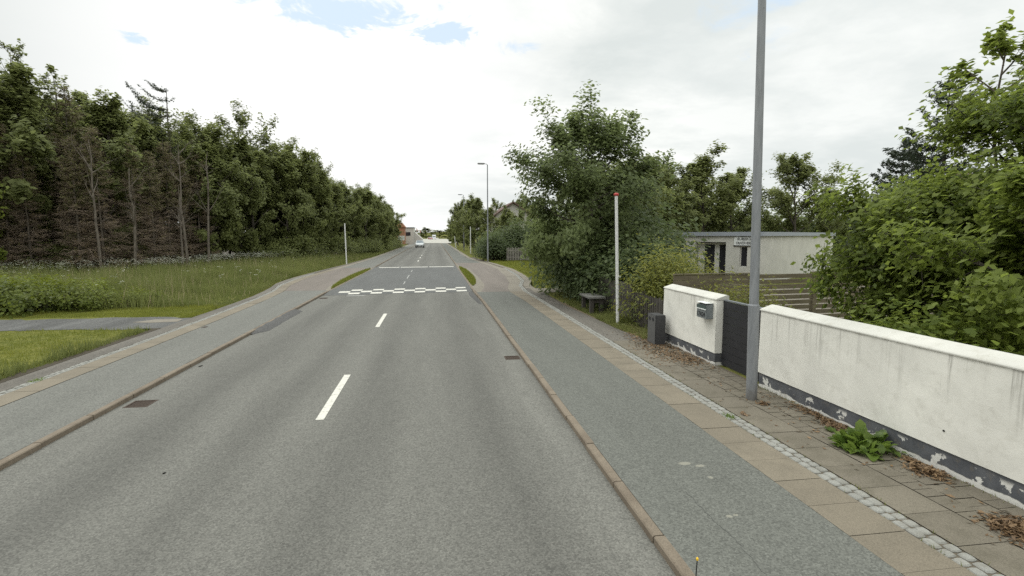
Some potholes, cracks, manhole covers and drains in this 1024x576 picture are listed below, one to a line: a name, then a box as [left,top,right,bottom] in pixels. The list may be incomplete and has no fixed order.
drain grate [123,400,158,408]
